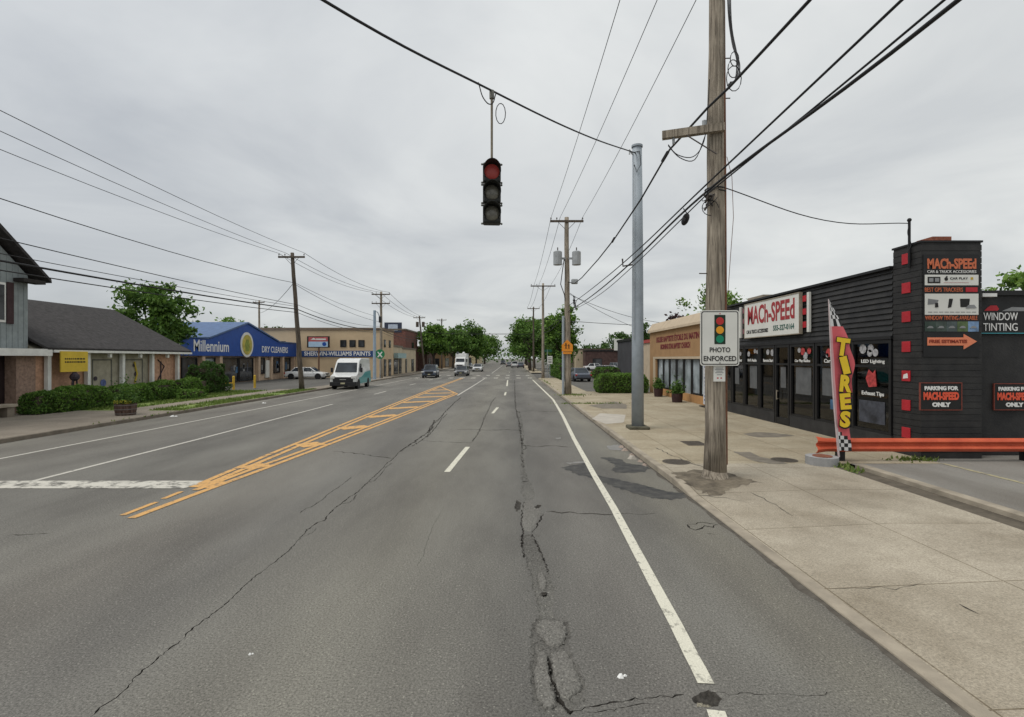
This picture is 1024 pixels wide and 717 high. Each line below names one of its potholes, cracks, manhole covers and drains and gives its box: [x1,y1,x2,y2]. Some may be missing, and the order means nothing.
crack [92,397,508,716]
pothole [692,690,722,707]
